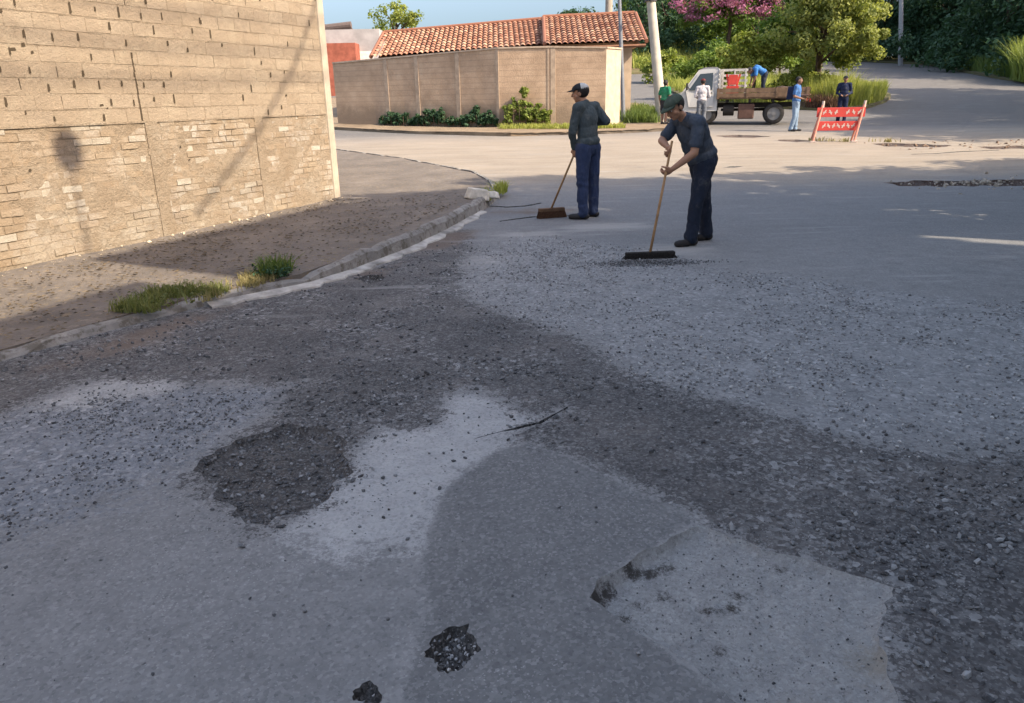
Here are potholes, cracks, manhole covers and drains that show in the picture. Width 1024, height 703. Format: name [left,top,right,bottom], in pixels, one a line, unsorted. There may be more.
pothole [888,179,1024,187]
pothole [352,681,382,703]
pothole [424,623,481,674]
